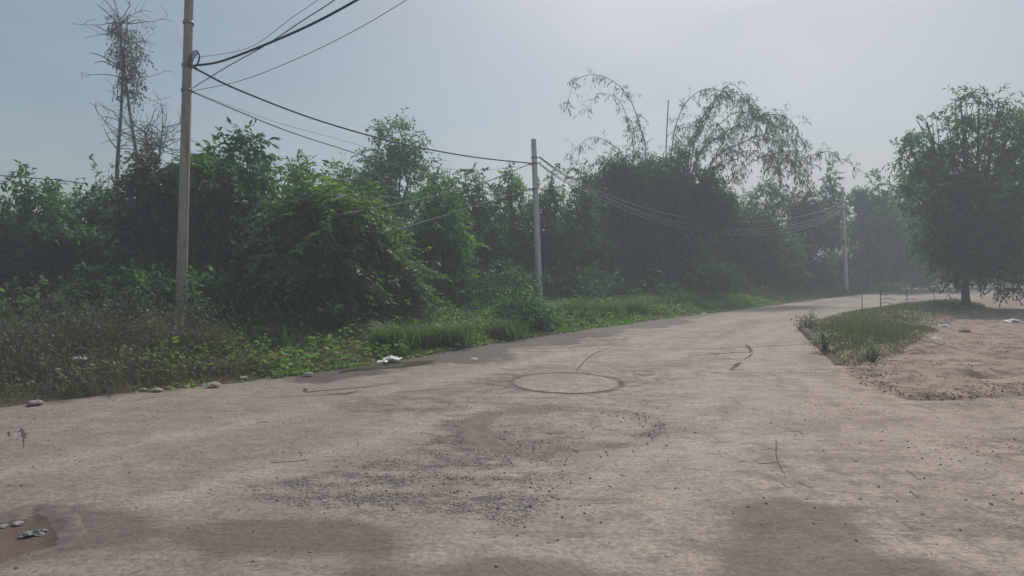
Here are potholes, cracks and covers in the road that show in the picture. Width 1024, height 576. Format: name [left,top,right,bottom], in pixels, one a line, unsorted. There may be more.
crack [302,382,396,395]
crack [713,345,753,373]
manhole cover [508,373,624,394]
